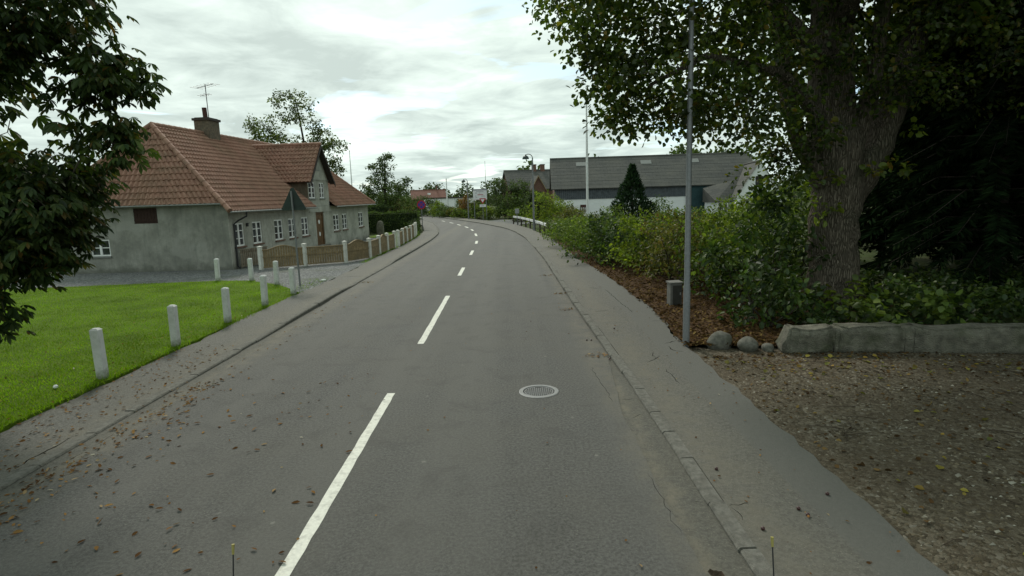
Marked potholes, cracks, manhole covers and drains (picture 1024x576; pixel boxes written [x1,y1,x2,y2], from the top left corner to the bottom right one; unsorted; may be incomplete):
manhole cover [519,385,559,398]
